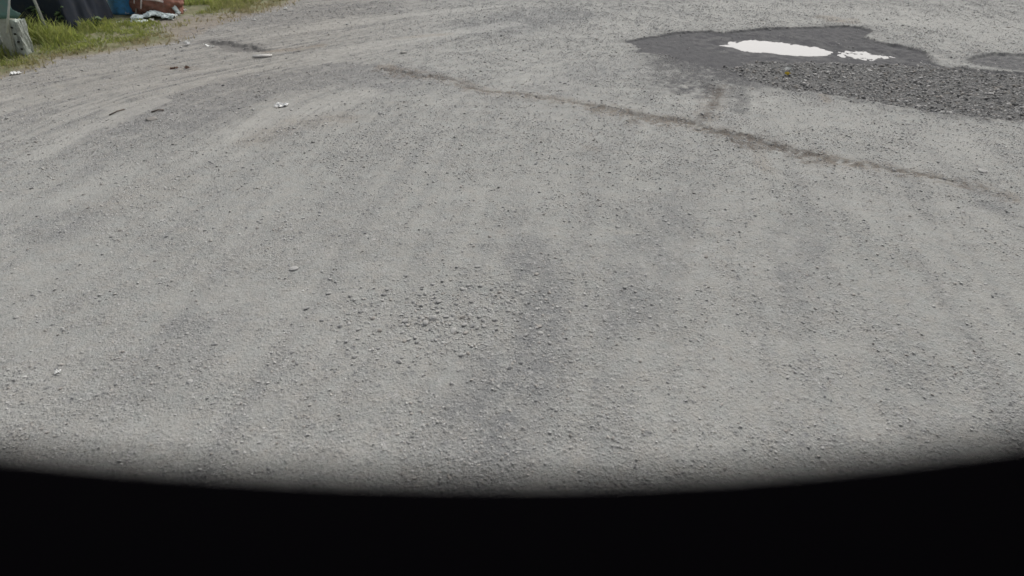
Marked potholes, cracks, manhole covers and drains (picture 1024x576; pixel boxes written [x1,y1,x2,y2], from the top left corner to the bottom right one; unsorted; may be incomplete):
pothole [622,25,1024,122]
crack [377,68,1013,198]
